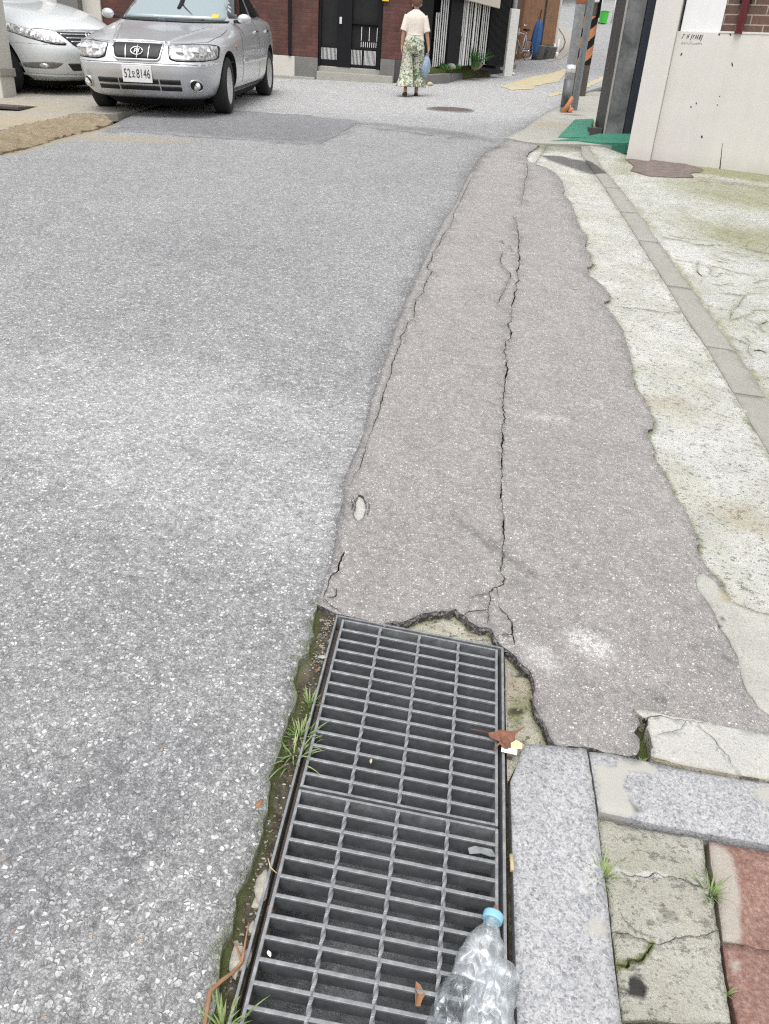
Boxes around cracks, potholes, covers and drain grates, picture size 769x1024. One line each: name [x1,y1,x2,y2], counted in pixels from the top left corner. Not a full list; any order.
drain grate [240,789,499,1024]
pothole [350,495,370,521]
crack [487,172,528,635]
pothole [382,610,554,783]
drain grate [300,619,498,829]
